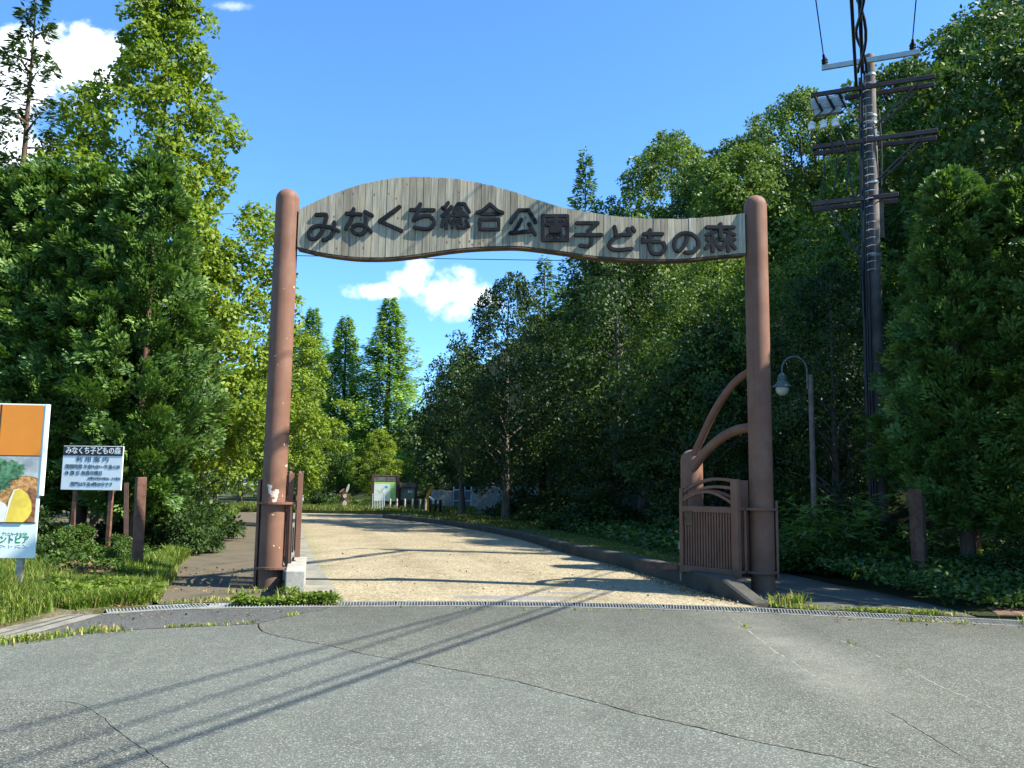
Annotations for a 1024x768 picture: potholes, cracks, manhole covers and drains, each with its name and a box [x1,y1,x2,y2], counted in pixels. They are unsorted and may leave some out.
drain grate [853,612,958,622]
drain grate [954,617,1024,625]
crack [730,616,857,697]
drain grate [105,603,209,613]
crack [824,632,1022,722]
drain grate [665,604,757,612]
drain grate [757,608,854,617]
crack [61,701,169,768]
